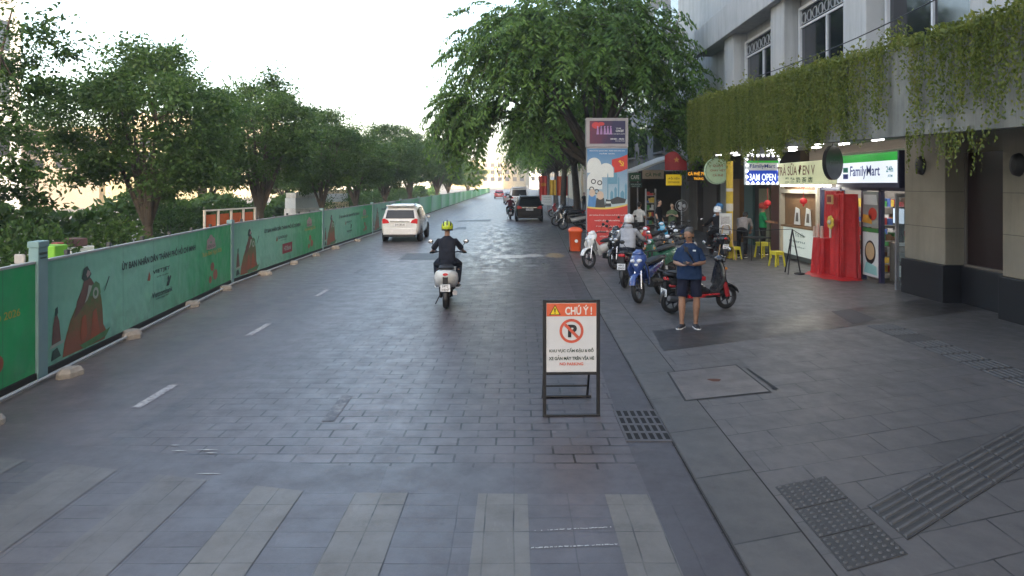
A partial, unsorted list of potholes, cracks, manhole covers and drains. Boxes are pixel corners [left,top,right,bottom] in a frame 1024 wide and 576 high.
manhole cover [667,364,778,401]
drain grate [613,409,673,443]
